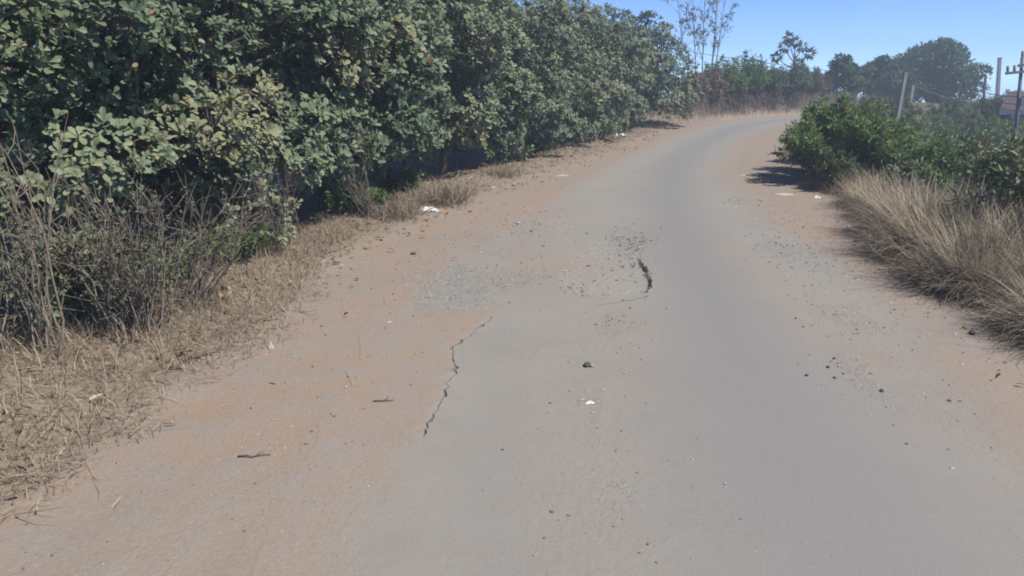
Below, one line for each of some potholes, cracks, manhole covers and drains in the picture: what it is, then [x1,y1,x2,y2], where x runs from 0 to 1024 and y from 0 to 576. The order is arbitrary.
crack [424,316,492,436]
